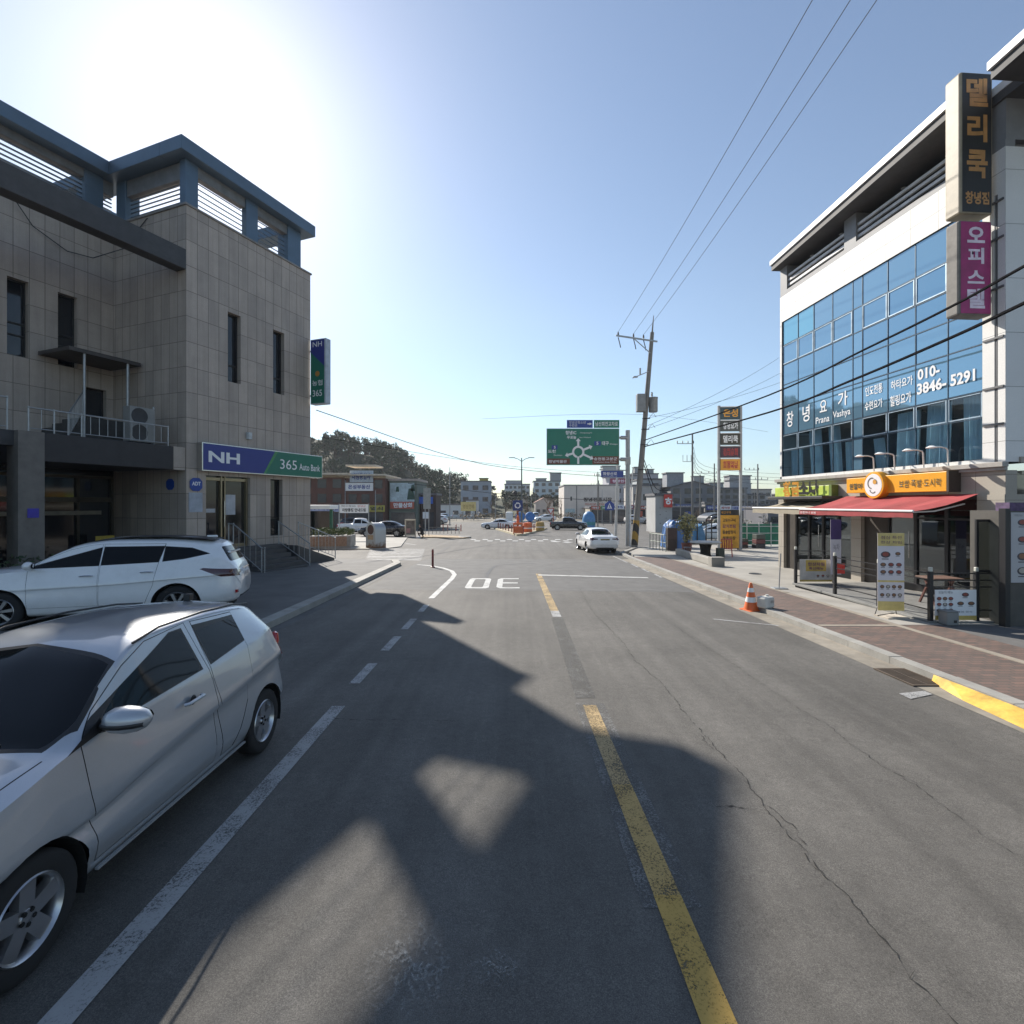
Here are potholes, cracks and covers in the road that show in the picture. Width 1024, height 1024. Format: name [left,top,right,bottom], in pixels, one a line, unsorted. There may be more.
crack [676,627,1024,859]
crack [580,589,958,1024]
drain grate [873,668,939,686]
